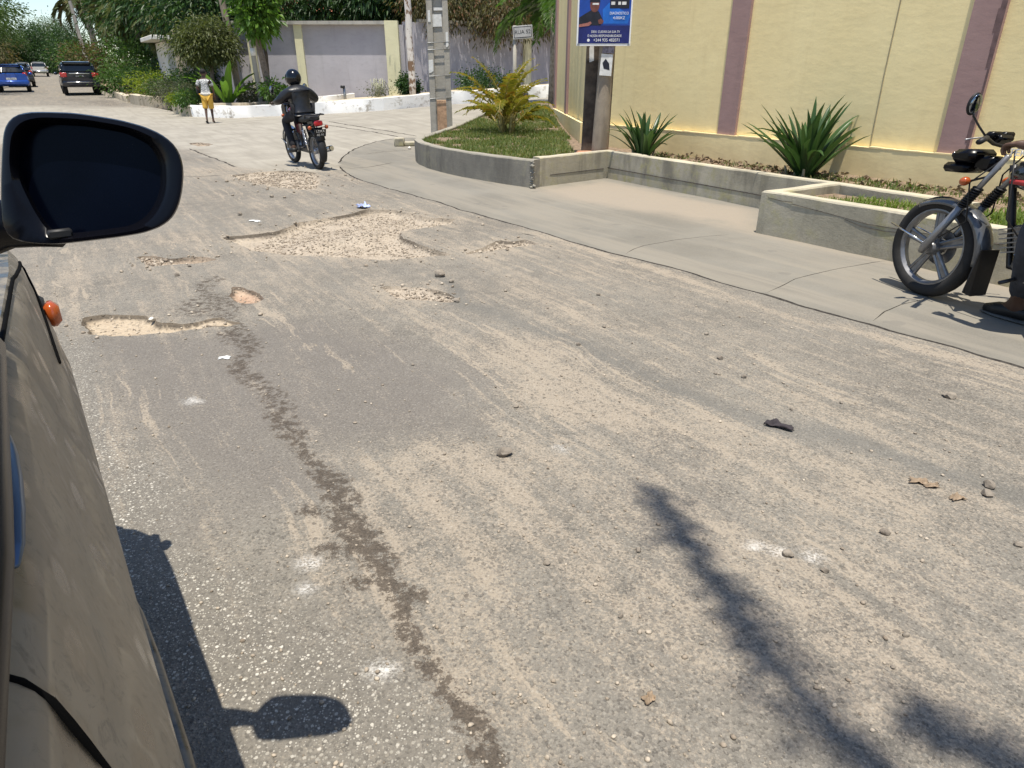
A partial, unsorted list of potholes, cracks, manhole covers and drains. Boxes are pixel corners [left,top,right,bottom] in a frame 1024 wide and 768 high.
pothole [466,240,538,254]
pothole [380,286,455,303]
pothole [229,287,264,304]
pothole [81,314,240,336]
pothole [231,170,321,190]
pothole [223,209,455,260]
pothole [137,256,216,266]
